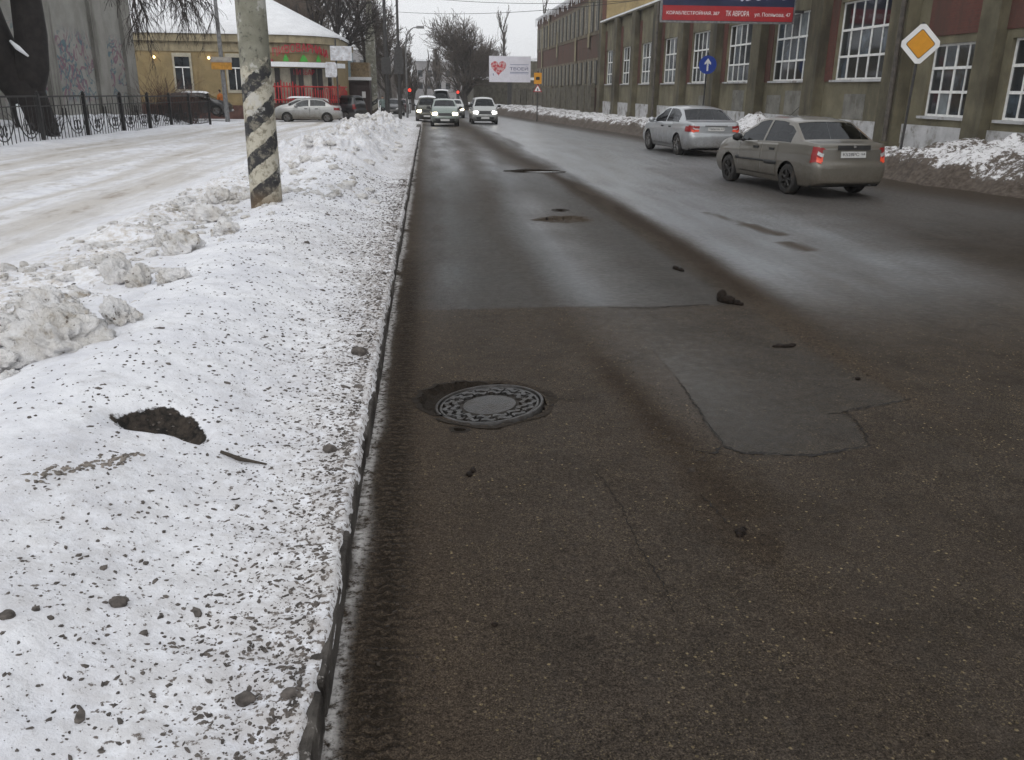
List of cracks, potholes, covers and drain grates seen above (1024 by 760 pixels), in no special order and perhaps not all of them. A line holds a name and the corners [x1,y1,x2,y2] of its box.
pothole [531,215,594,223]
crack [595,471,679,619]
manhole cover [435,381,558,429]
